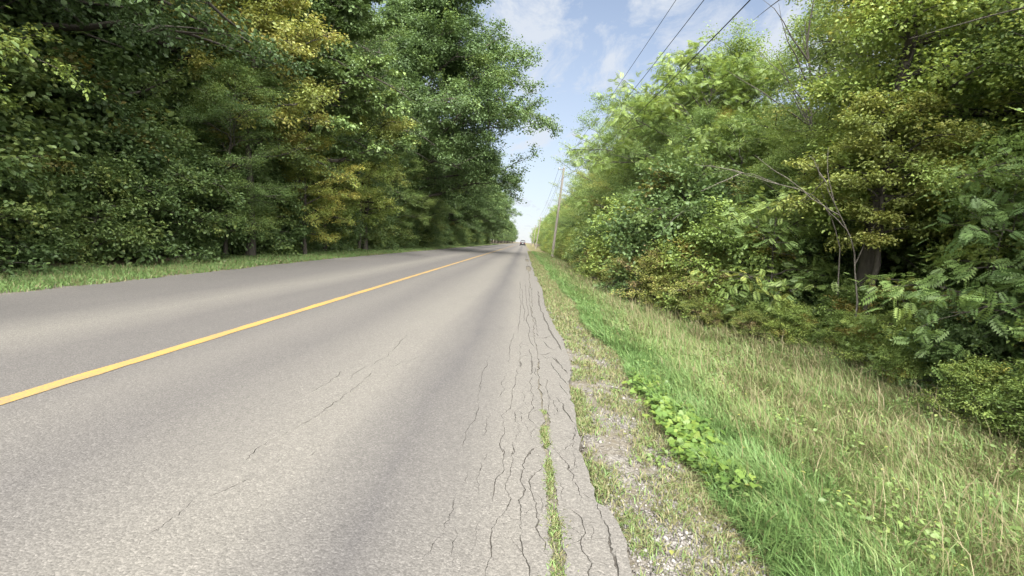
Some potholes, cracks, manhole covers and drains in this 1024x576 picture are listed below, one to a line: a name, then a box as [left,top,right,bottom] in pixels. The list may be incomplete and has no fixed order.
crack [139,338,416,544]
crack [422,256,621,576]
